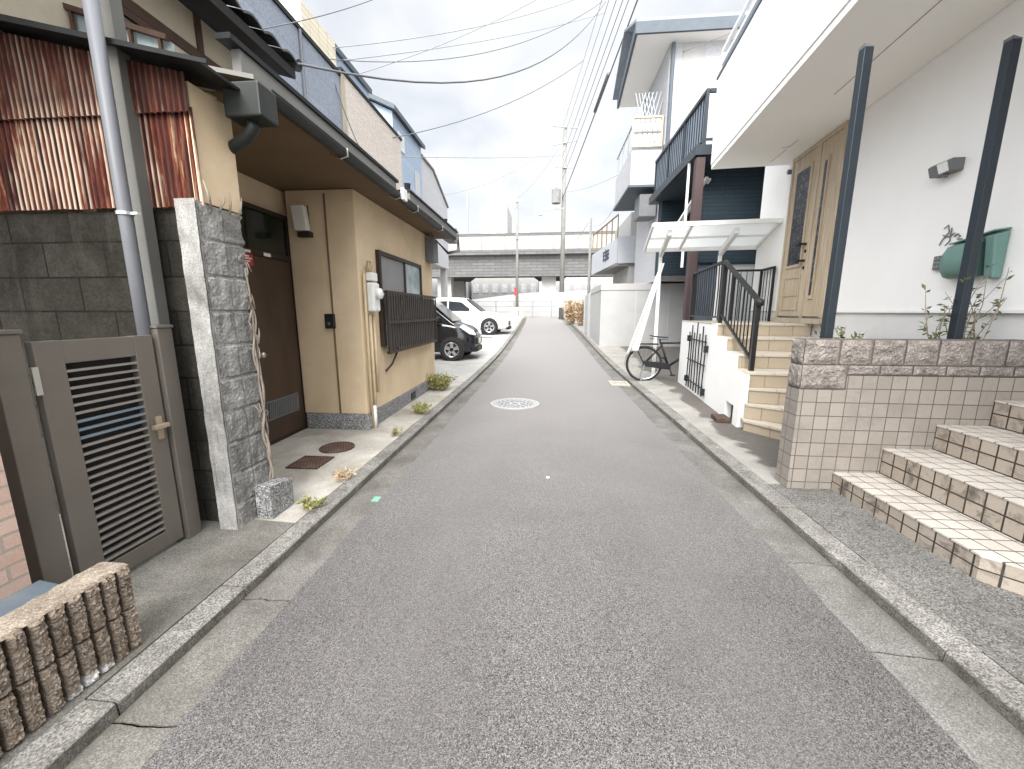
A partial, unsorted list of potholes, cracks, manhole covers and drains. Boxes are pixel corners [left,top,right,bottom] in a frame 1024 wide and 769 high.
manhole cover [285,455,334,470]
manhole cover [490,398,539,410]
manhole cover [319,441,355,454]
